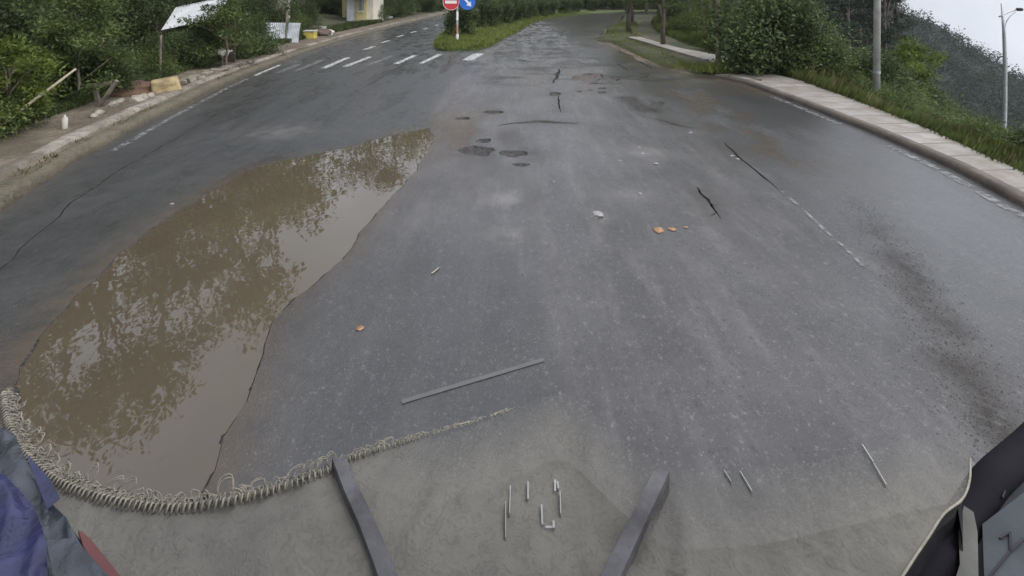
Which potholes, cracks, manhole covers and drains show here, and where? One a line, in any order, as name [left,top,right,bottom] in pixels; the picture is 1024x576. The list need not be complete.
crack [697,143,780,218]
crack [1,83,289,269]
pothole [14,128,435,497]
pothole [499,150,528,158]
pothole [457,145,496,156]
crack [498,48,672,126]
